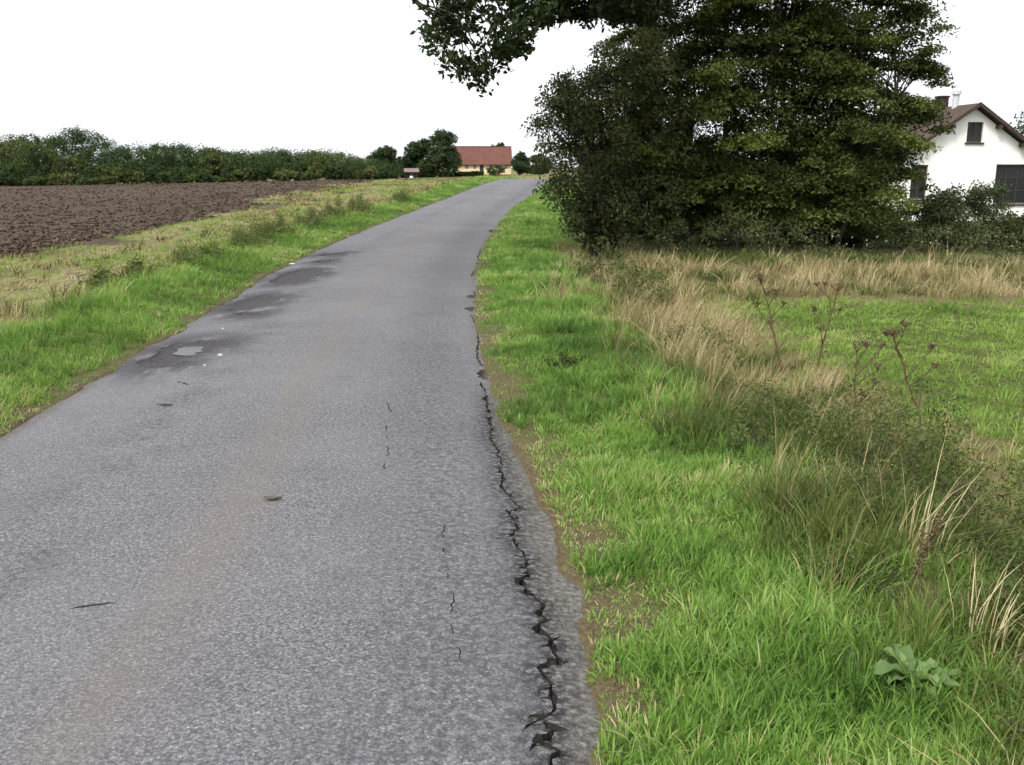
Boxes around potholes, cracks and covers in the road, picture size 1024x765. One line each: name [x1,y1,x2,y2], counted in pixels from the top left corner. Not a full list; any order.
crack [471,315,572,765]
crack [441,523,461,660]
pothole [135,340,230,368]
